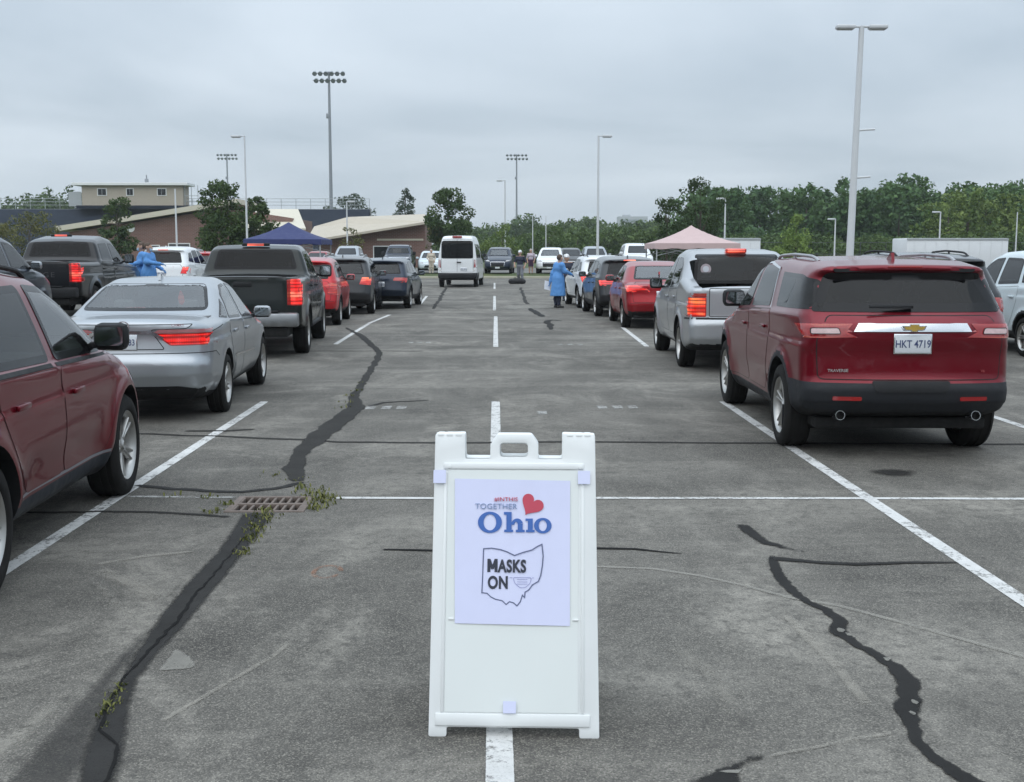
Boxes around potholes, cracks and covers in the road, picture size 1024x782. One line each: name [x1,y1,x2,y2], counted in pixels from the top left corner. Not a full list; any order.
crack [519,287,561,330]
drain grate [223,496,315,513]
crack [97,537,244,782]
crack [432,287,447,309]
crack [135,482,305,493]
